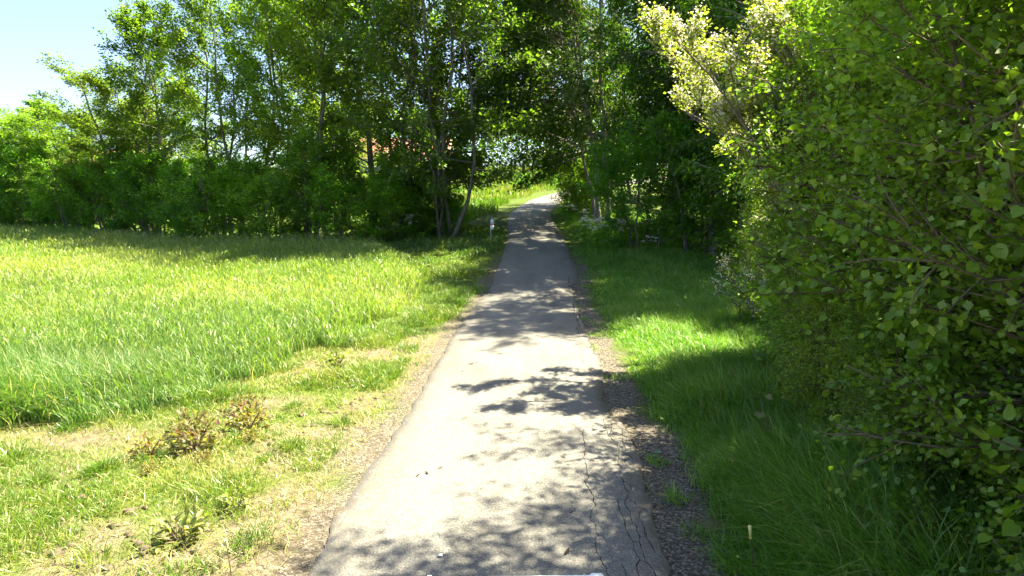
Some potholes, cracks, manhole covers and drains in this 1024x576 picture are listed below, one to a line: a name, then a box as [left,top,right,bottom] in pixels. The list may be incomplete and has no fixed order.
crack [582,419,656,576]
